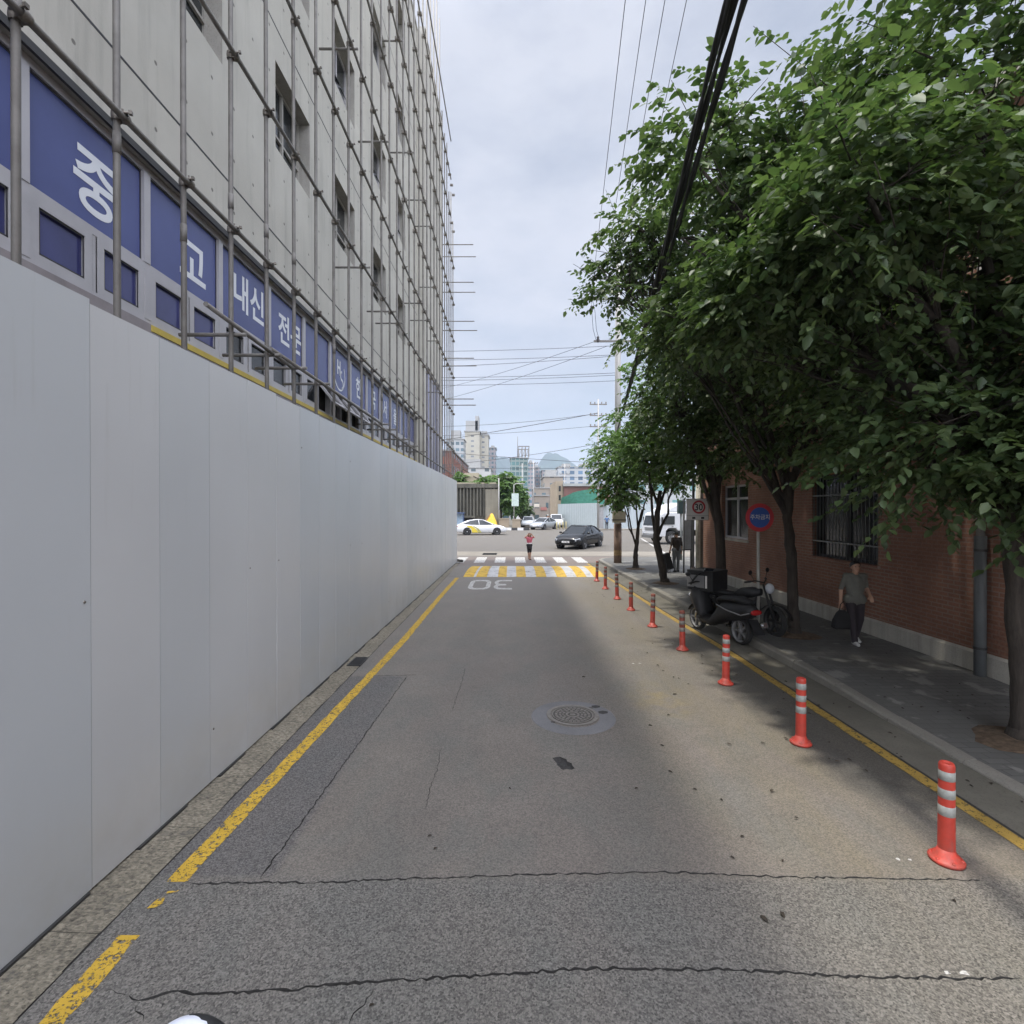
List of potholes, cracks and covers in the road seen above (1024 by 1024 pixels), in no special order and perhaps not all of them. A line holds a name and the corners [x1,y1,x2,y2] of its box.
crack [108,966,1019,1024]
manhole cover [531,701,616,735]
drain grate [346,657,368,666]
crack [193,871,983,885]
